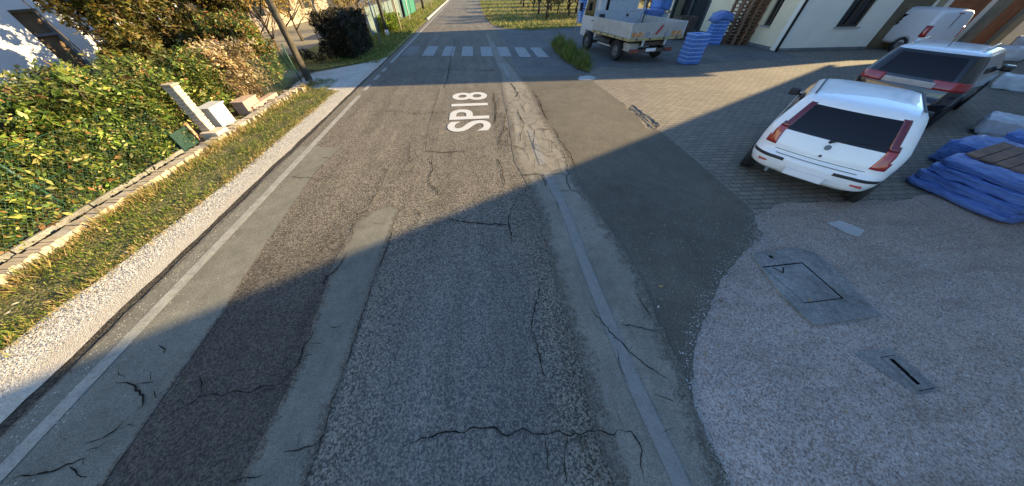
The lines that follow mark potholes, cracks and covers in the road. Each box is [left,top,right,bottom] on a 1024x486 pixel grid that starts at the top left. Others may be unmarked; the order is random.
crack [590,294,674,402]
manhole cover [751,247,881,326]
crack [403,283,644,481]
crack [444,69,581,241]
crack [12,372,166,485]
crack [172,145,468,485]
